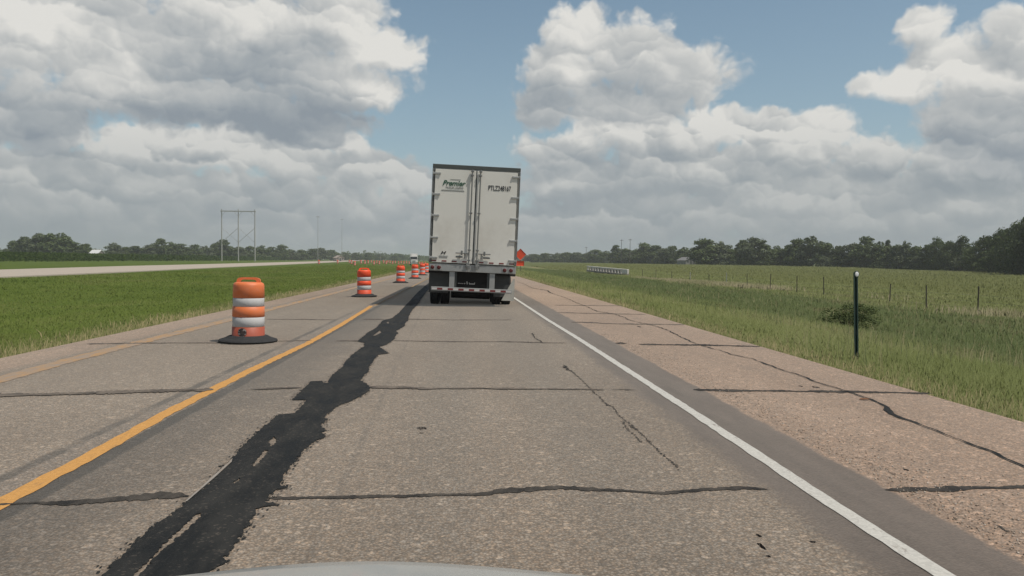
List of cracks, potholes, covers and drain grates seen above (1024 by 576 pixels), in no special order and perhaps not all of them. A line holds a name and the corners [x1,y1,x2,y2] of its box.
crack [0,365,679,470]
crack [525,284,1024,466]
